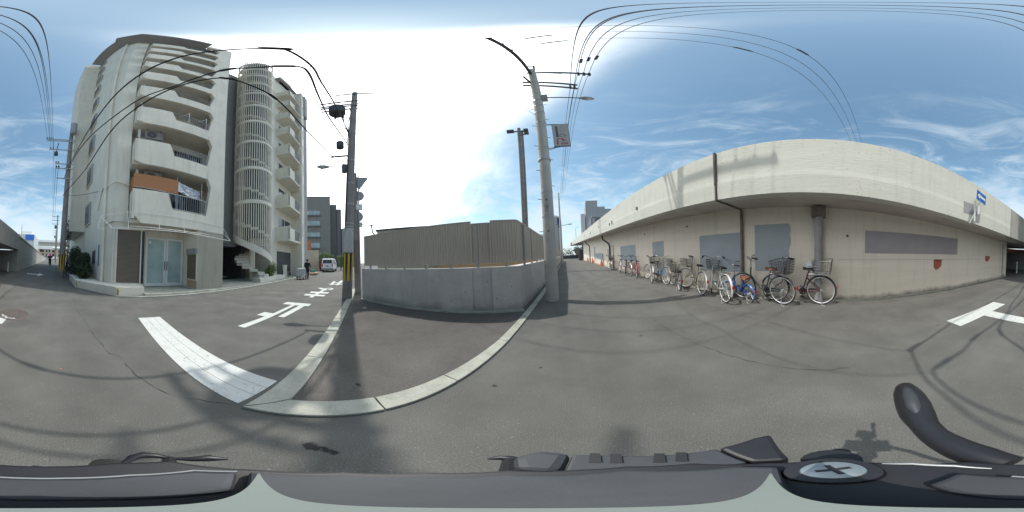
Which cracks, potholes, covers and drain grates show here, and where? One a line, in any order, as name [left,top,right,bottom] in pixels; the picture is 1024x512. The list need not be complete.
crack [73,299,233,405]
crack [652,319,840,370]
